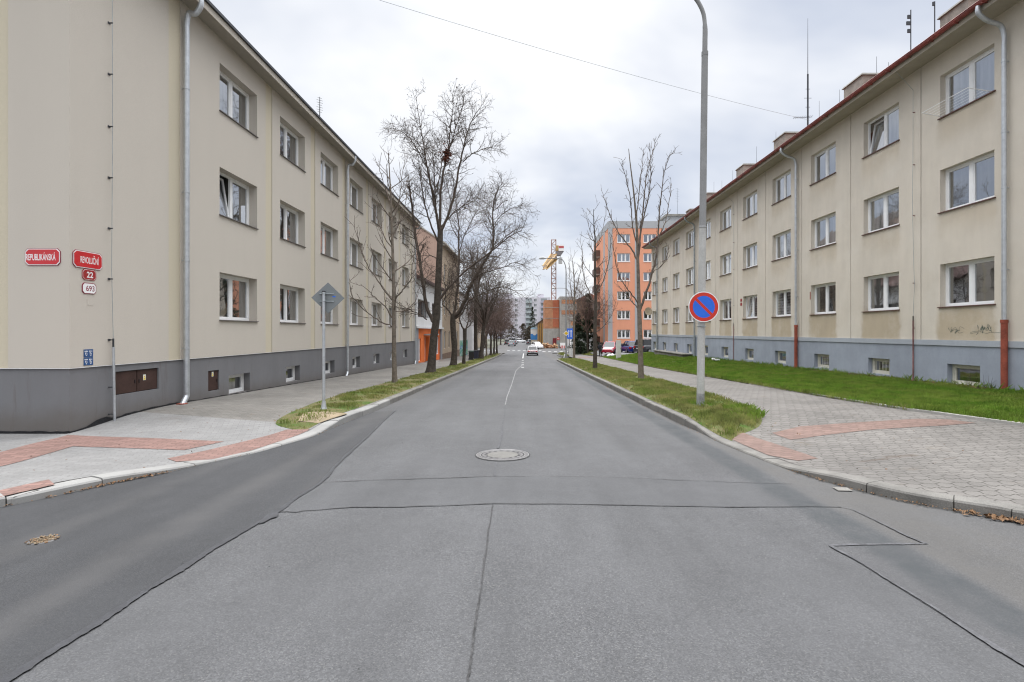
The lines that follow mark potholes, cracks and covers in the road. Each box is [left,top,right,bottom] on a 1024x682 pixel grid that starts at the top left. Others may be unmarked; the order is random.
manhole cover [475,449,530,461]
